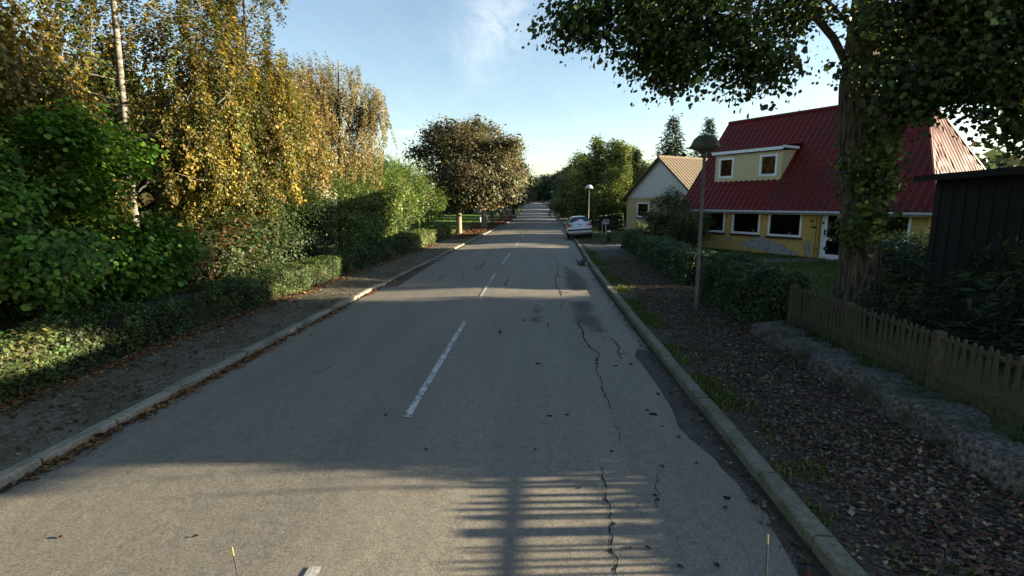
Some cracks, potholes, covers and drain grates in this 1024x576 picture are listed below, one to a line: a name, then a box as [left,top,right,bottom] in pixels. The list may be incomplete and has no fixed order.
crack [596,463,618,575]
crack [574,324,627,442]
crack [523,255,569,328]
